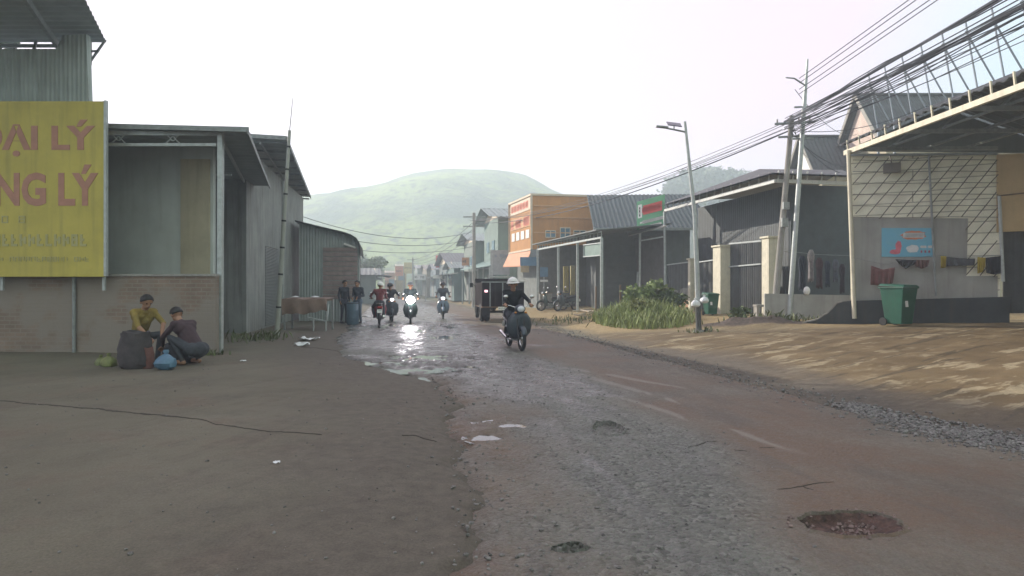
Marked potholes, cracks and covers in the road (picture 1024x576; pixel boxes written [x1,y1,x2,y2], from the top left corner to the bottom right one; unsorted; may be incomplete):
crack [782,482,827,490]
pothole [551,541,589,553]
pothole [786,507,911,540]
pothole [590,420,627,437]
